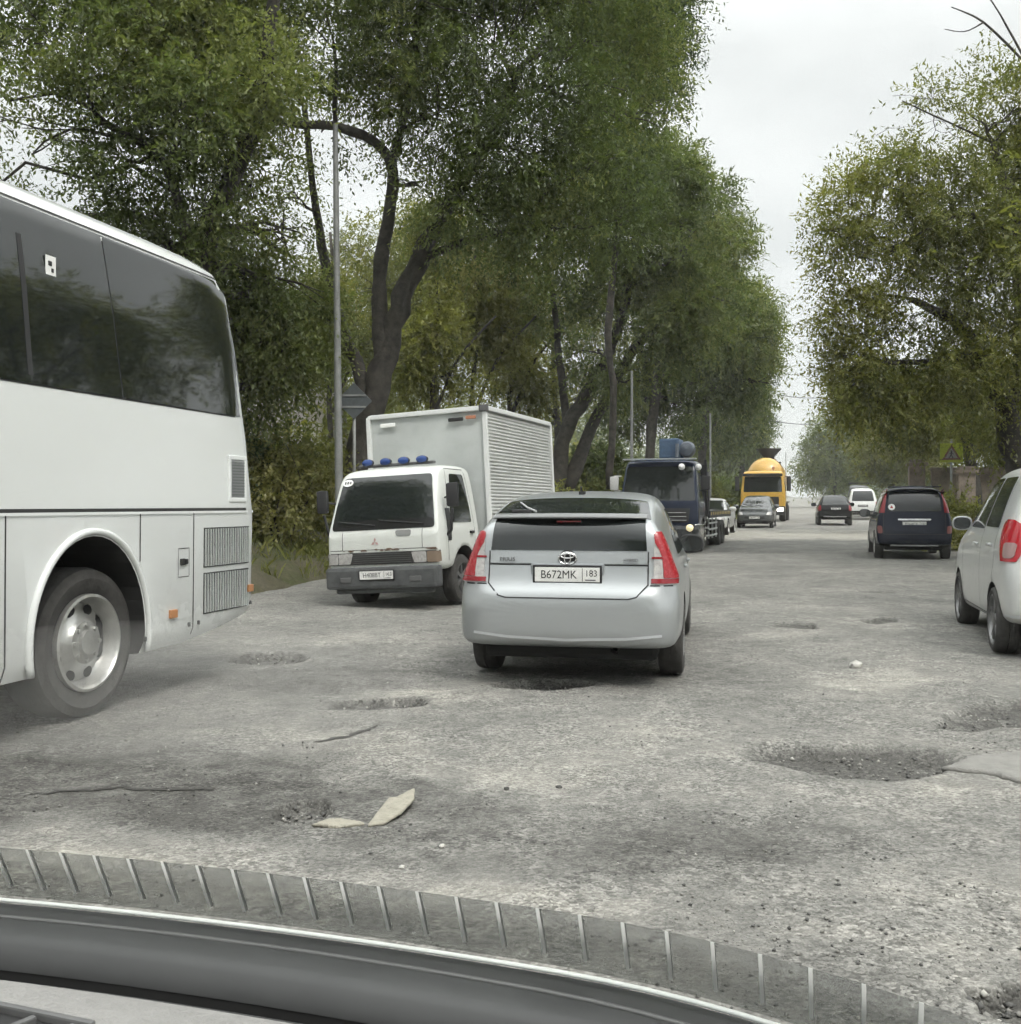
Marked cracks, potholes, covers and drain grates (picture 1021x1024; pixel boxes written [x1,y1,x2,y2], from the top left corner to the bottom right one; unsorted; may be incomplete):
pothole [854,616,906,625]
crack [24,786,211,796]
pothole [920,697,1021,734]
pothole [219,650,318,667]
pothole [258,795,348,829]
pothole [307,696,442,712]
pothole [481,677,614,692]
crack [315,725,378,742]
pothole [765,620,825,630]
pothole [711,738,976,785]
